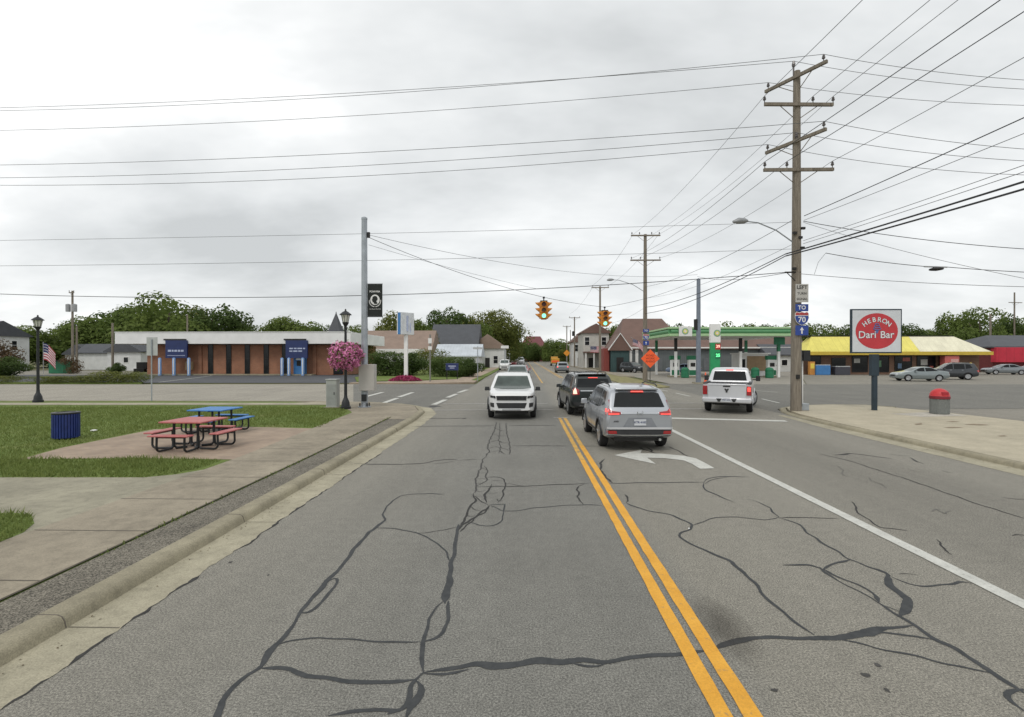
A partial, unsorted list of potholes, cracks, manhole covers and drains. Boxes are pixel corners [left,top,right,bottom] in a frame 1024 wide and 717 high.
crack [233,423,629,552]
crack [838,453,924,476]
crack [851,501,907,531]
